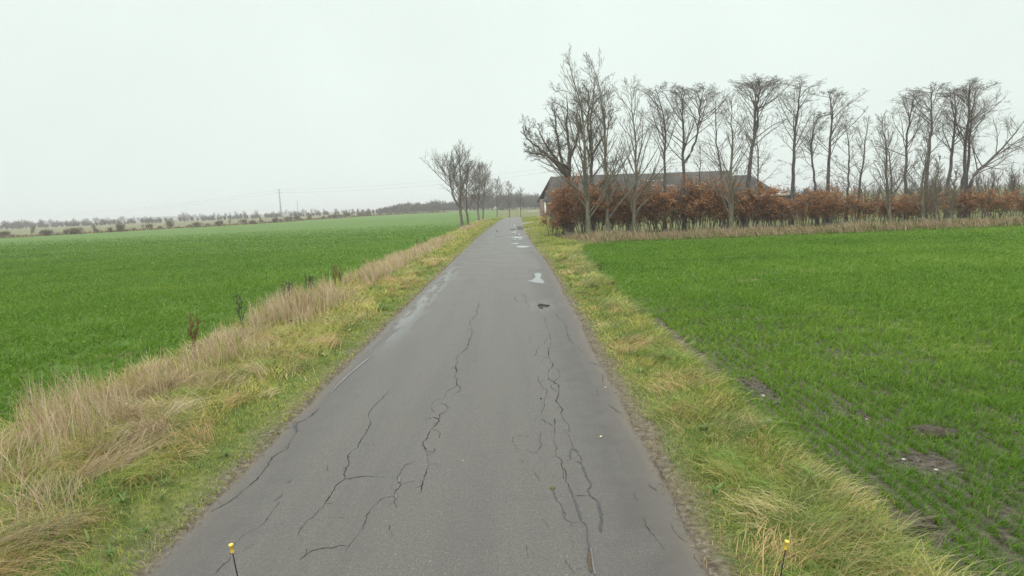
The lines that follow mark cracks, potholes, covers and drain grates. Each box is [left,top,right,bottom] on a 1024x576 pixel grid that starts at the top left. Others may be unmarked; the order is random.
crack [512,298,587,496]
crack [298,303,479,560]
crack [210,409,318,571]
